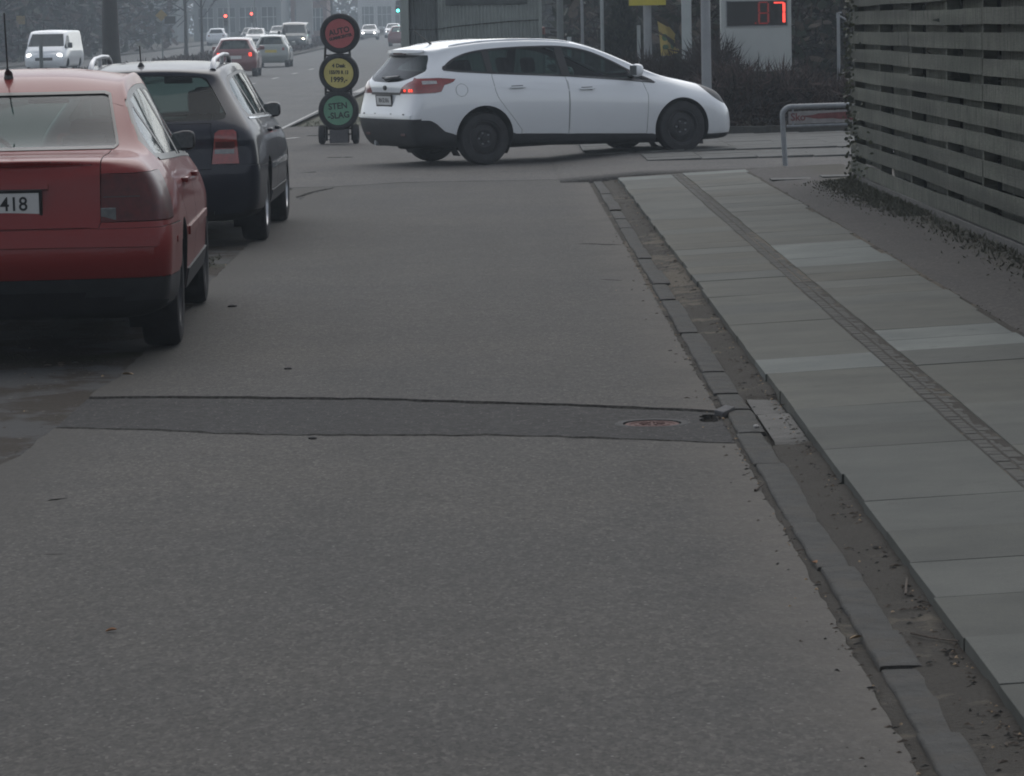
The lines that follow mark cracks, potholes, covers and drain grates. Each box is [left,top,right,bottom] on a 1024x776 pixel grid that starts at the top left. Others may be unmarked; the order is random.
manhole cover [615,418,689,428]
